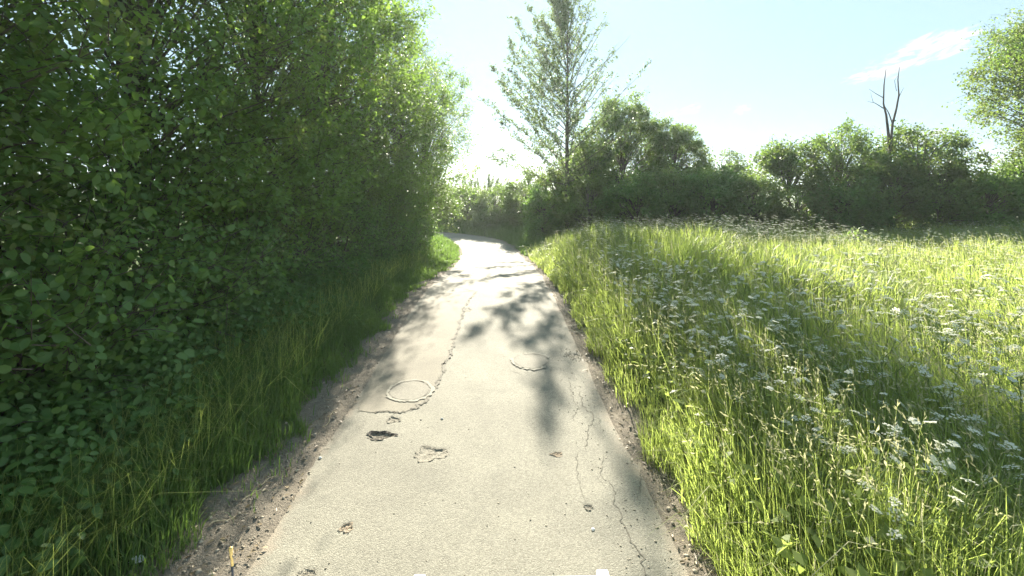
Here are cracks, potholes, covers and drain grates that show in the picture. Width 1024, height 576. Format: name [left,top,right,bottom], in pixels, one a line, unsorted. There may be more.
pothole [413,445,450,462]
manhole cover [386,379,435,402]
pothole [366,431,398,440]
manhole cover [510,352,550,370]
crack [568,380,654,576]
pothole [338,521,353,533]
